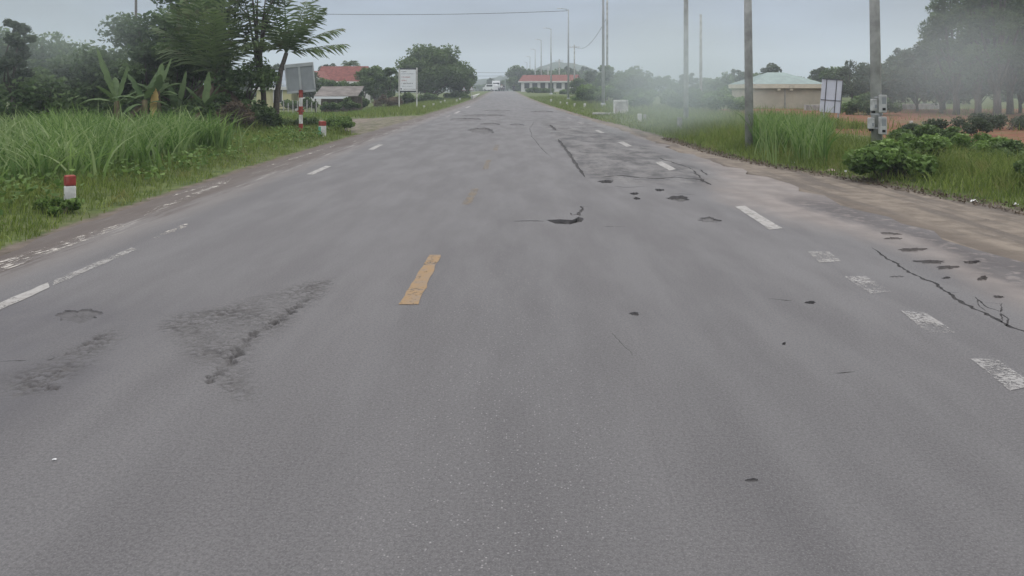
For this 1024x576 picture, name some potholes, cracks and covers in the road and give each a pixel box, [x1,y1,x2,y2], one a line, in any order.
crack [874,249,1024,332]
crack [605,158,711,195]
pothole [54,309,103,324]
